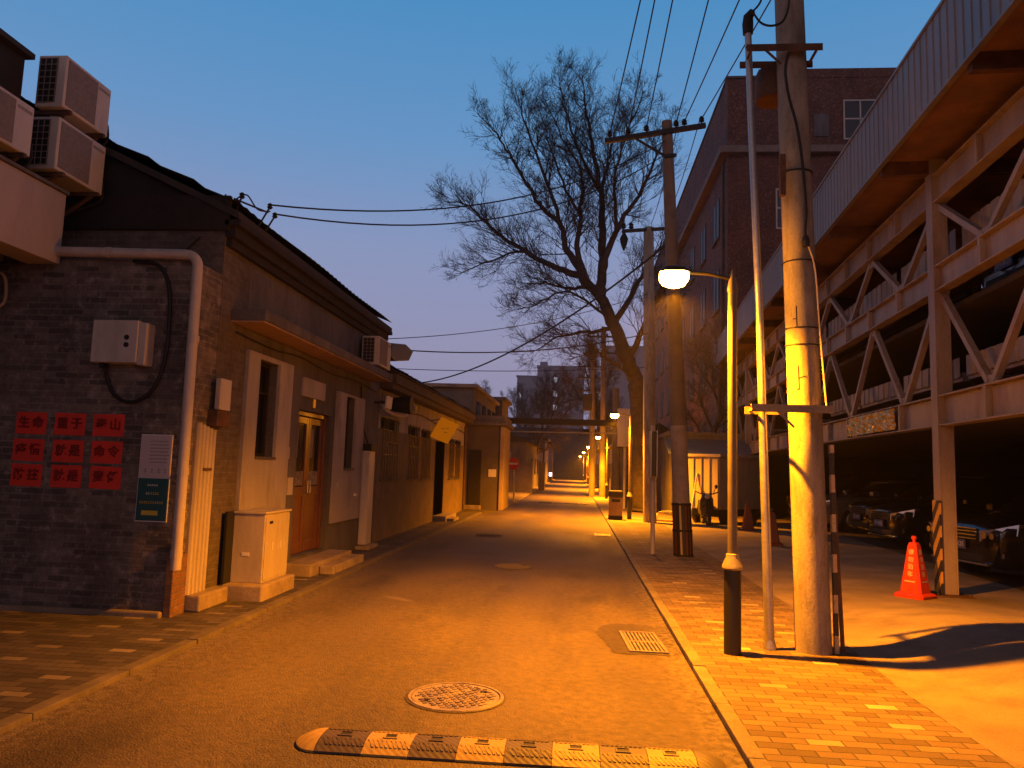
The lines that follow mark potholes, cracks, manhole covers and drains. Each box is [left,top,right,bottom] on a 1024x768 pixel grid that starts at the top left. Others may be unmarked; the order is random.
drain grate [619,630,670,654]
manhole cover [405,682,506,713]
